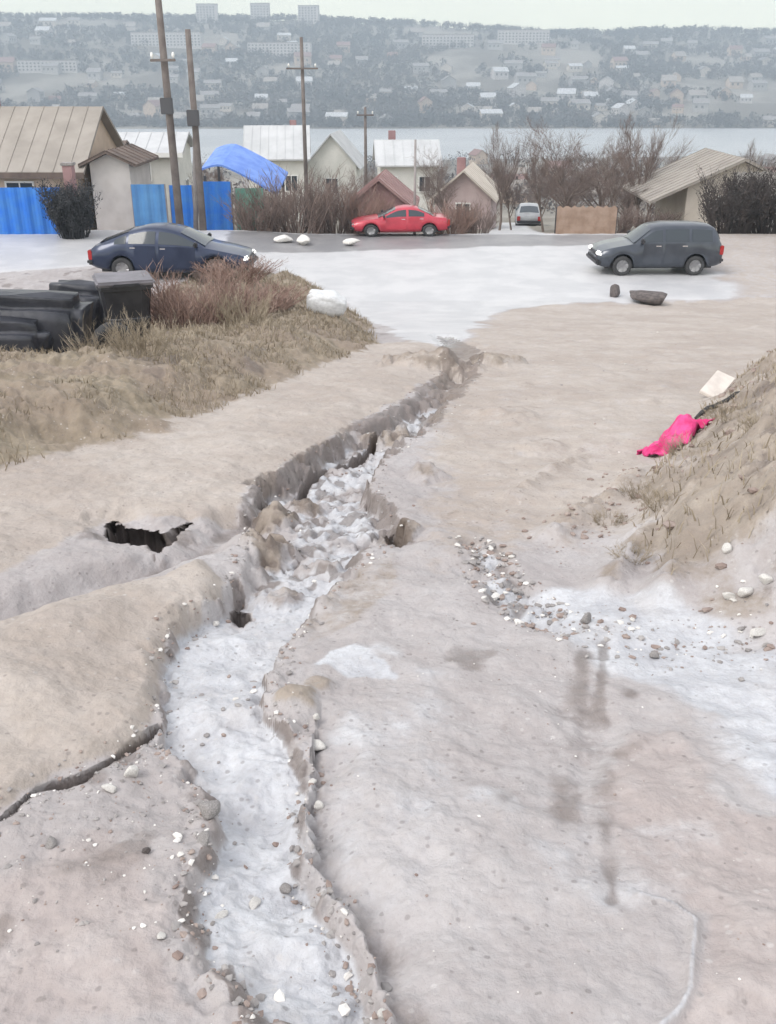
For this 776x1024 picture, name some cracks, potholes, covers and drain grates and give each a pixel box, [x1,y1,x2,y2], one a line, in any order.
crack [0,723,164,822]
crack [253,430,385,534]
pothole [101,520,196,567]
